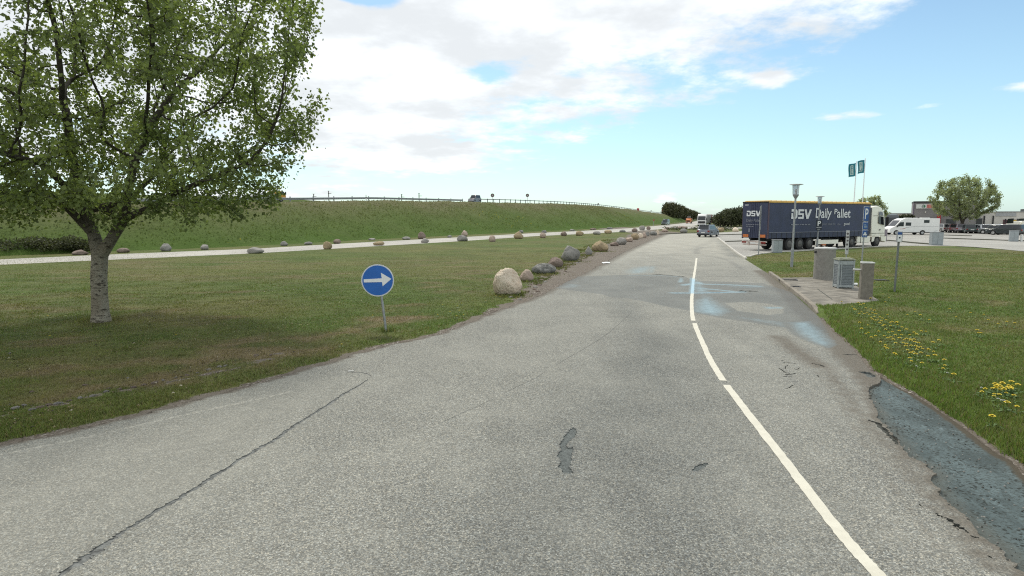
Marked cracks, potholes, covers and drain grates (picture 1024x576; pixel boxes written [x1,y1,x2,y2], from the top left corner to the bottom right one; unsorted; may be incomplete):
crack [779,360,824,389]
crack [58,372,371,576]
pothole [557,427,577,474]
